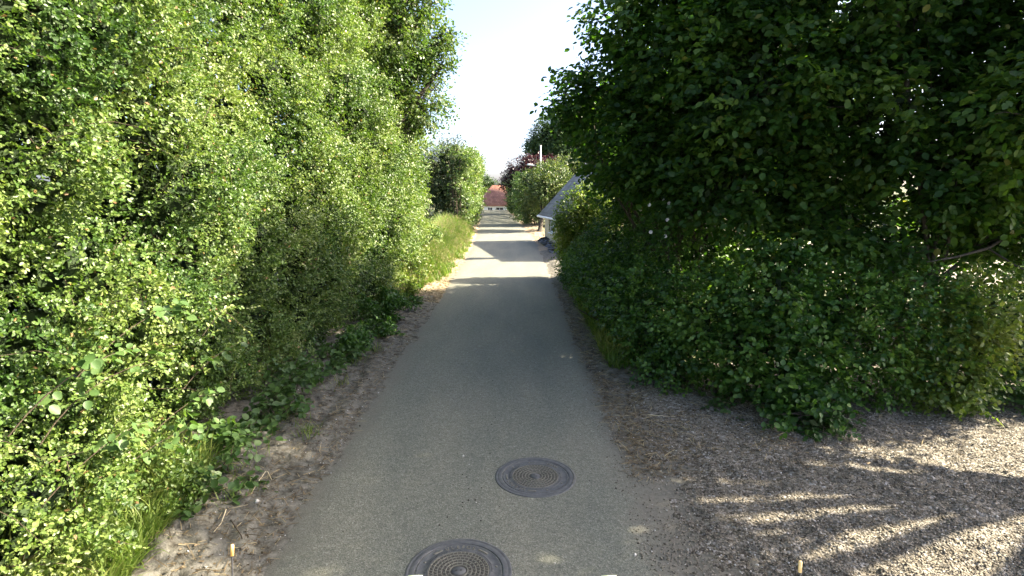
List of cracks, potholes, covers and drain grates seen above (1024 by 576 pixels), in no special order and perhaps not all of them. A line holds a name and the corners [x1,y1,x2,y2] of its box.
manhole cover [495,457,576,498]
manhole cover [405,539,512,576]
